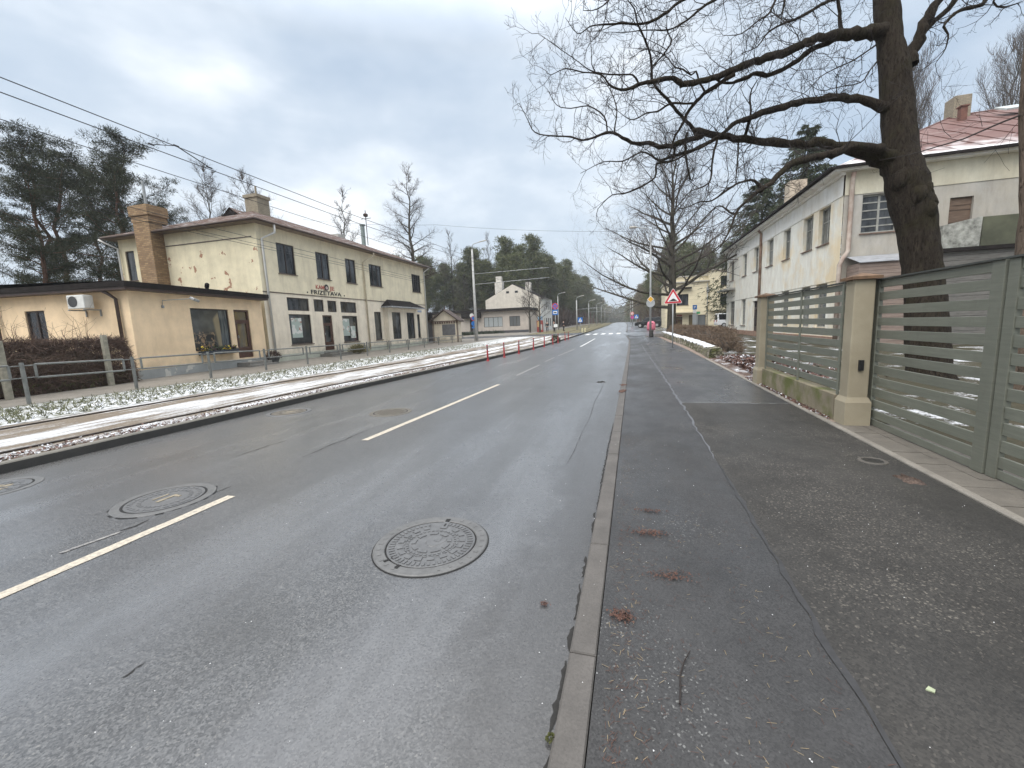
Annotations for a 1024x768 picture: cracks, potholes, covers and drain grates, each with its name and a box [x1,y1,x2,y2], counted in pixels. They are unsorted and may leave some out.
utility cover [857,457,889,465]
manhole cover [0,476,45,495]
crack [543,427,613,768]
manhole cover [369,408,412,417]
manhole cover [371,517,489,578]
manhole cover [266,408,312,417]
manhole cover [106,483,217,519]
